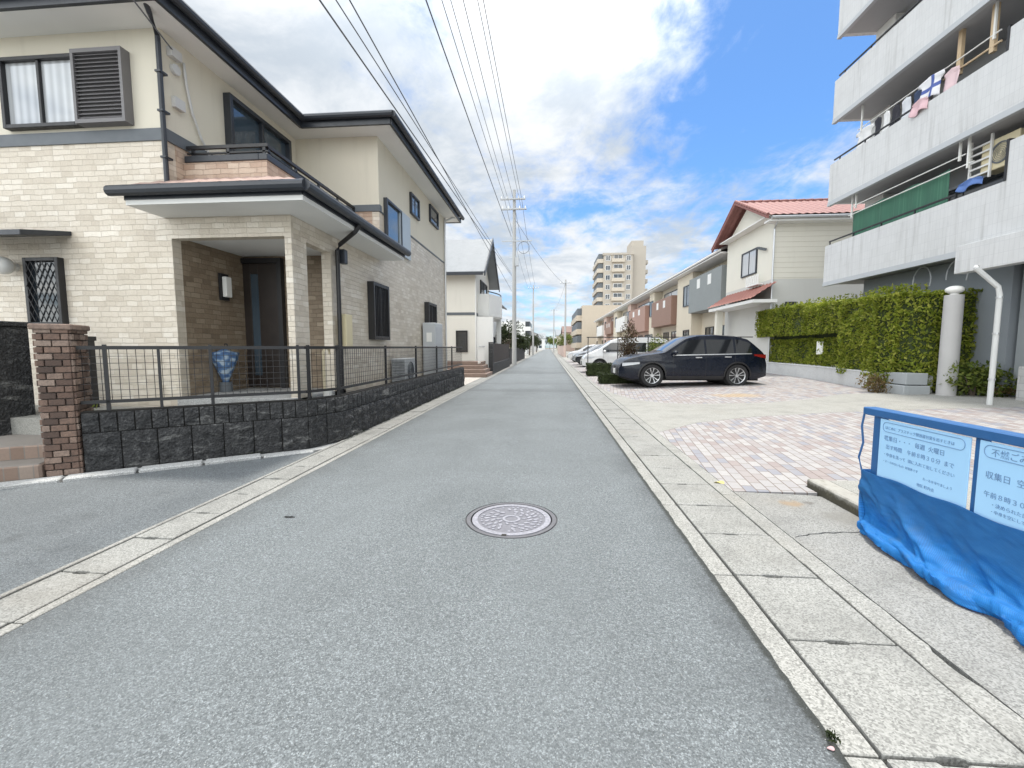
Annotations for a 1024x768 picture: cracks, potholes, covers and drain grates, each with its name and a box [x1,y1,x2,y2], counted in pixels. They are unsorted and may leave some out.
manhole cover [465,502,558,539]
